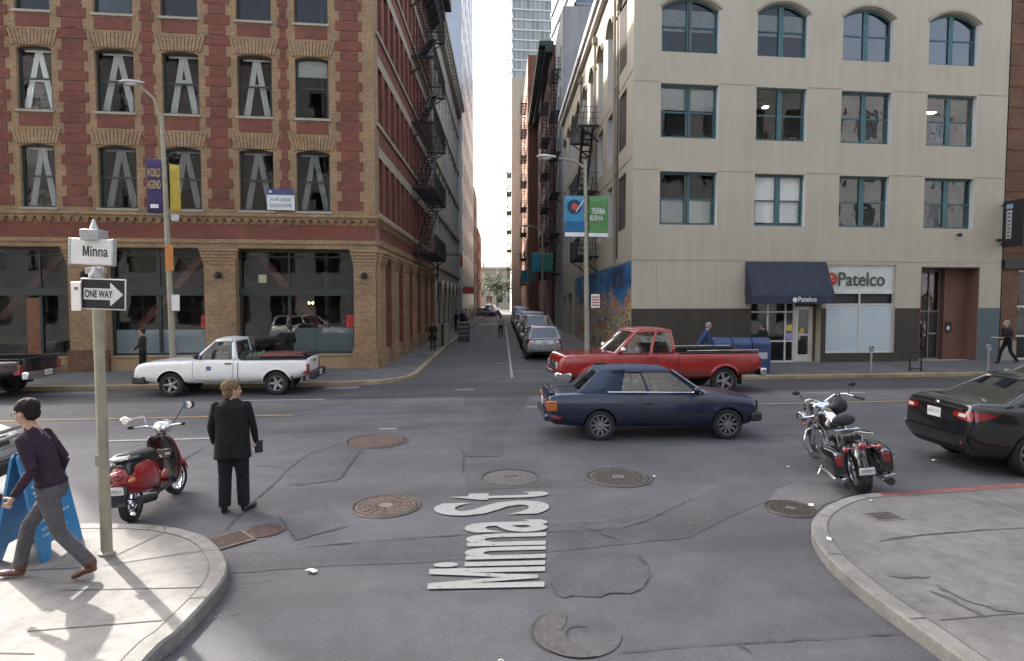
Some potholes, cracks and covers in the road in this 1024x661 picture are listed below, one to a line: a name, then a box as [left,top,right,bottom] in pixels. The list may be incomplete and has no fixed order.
utility cover [861,511,906,521]
manhole cover [344,434,409,448]
drain grate [208,523,285,550]
manhole cover [584,468,653,487]
manhole cover [763,500,819,518]
manhole cover [481,469,540,485]
manhole cover [350,494,421,518]
